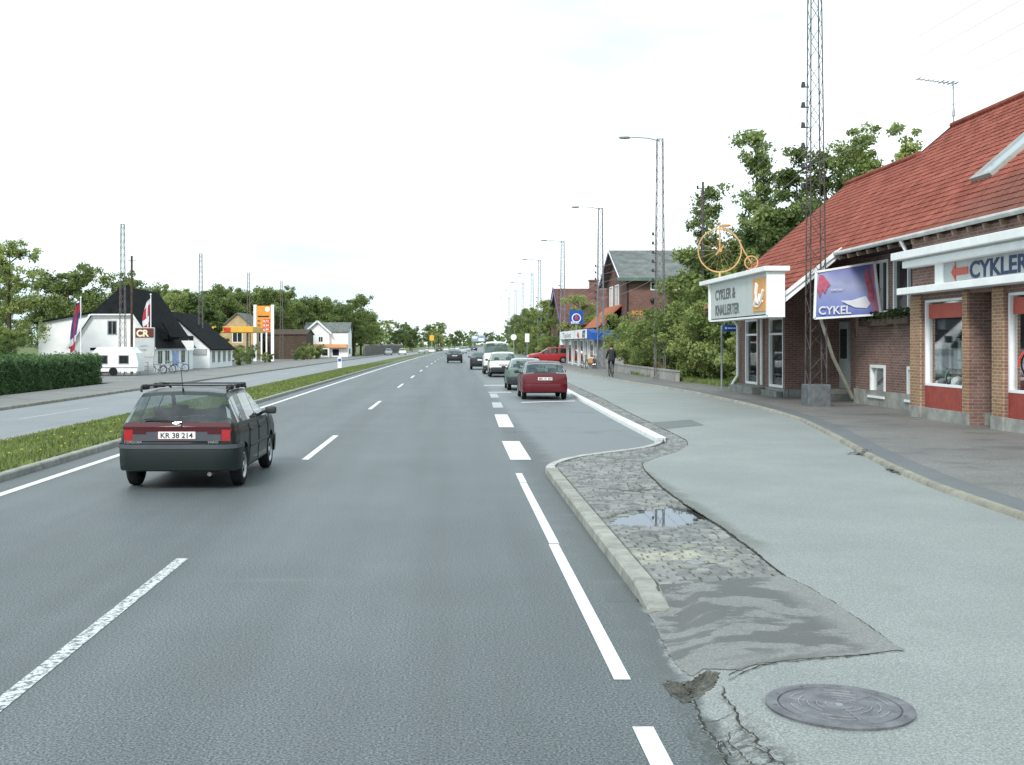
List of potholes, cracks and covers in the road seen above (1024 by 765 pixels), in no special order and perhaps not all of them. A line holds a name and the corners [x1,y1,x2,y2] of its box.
pothole [662,670,720,704]
crack [645,470,904,765]
manhole cover [765,684,917,731]
